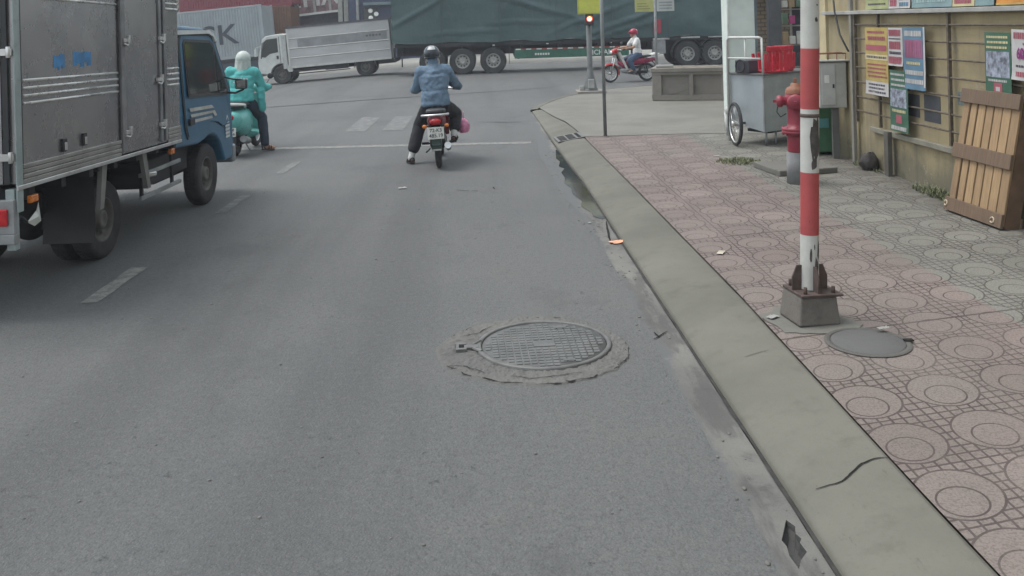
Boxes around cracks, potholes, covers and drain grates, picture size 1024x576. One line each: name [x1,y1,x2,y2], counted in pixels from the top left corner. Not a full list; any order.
drain grate [553,132,585,143]
crack [816,457,889,489]
pothole [782,520,807,568]
manhole cover [455,320,612,371]
manhole cover [824,327,914,357]
